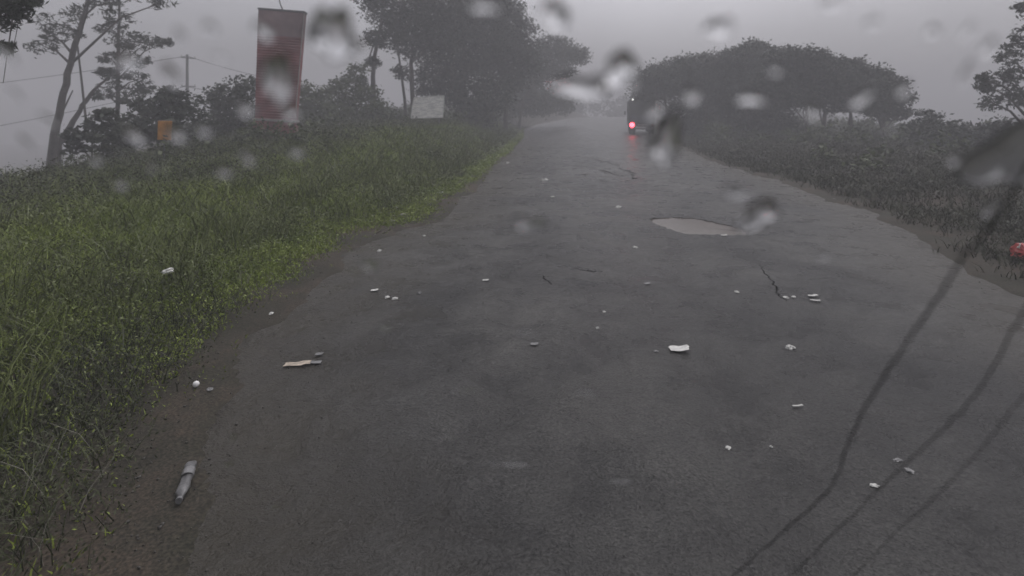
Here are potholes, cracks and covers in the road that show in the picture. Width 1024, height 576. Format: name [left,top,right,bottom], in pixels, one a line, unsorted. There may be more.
crack [759,264,787,301]
pothole [649,217,748,235]
